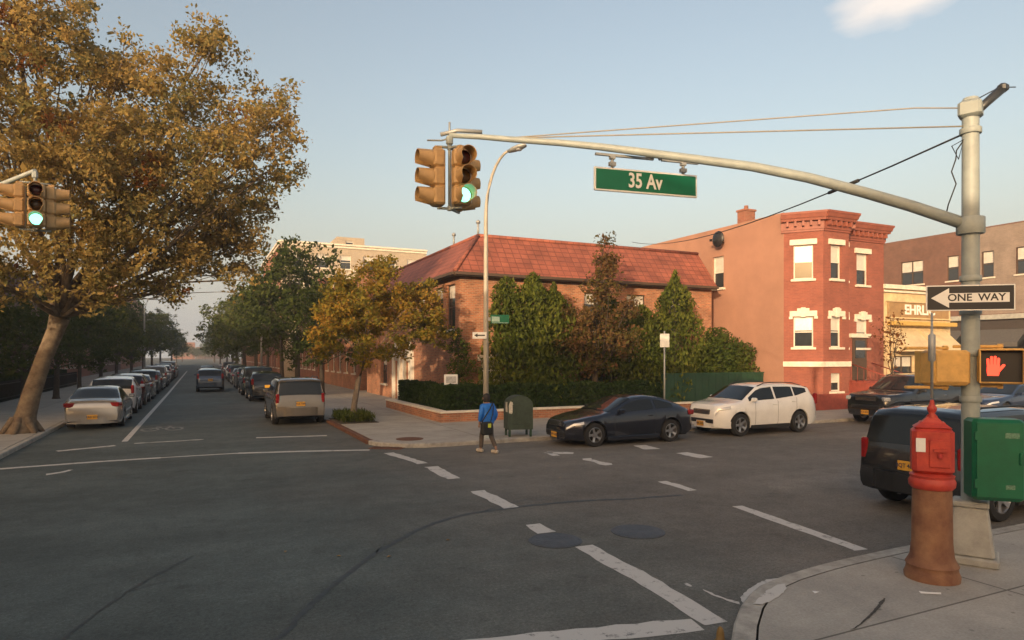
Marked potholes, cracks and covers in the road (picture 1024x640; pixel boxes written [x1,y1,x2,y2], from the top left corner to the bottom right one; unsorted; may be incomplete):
crack [853,598,886,629]
manhole cover [529,533,582,548]
manhole cover [611,524,665,539]
